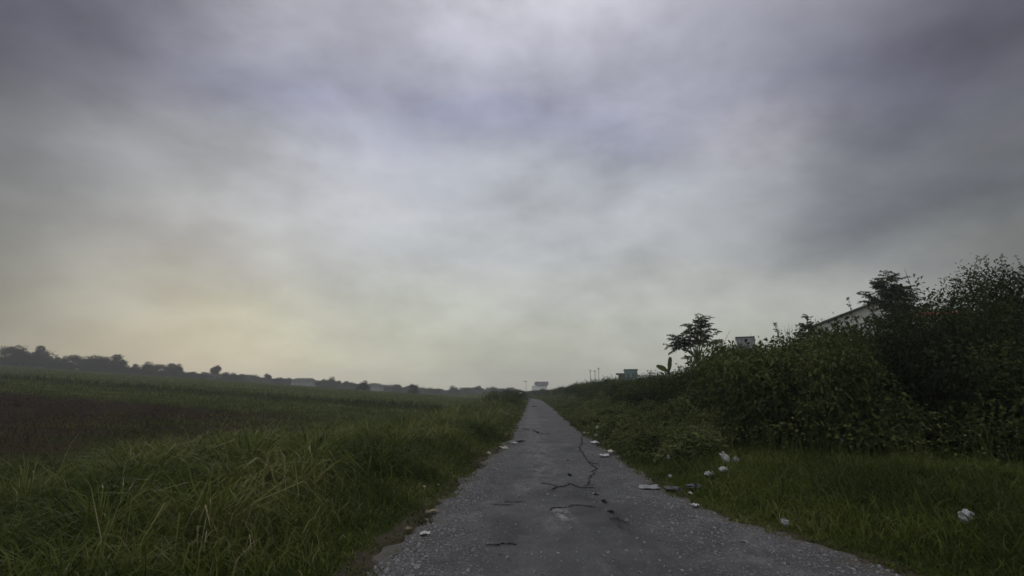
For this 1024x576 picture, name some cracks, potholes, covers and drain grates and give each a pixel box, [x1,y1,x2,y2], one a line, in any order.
crack [494,437,599,511]
